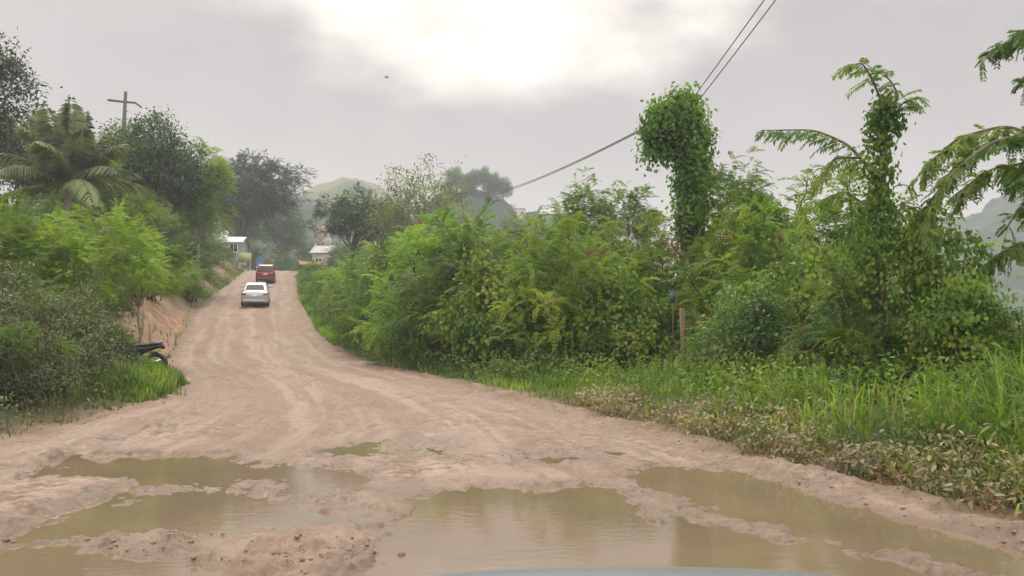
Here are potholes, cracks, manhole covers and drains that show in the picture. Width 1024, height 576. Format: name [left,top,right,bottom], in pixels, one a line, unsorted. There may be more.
pothole [278,437,403,459]
pothole [323,475,986,576]
pothole [613,461,1024,576]
pothole [2,446,283,490]
pothole [0,484,410,548]
